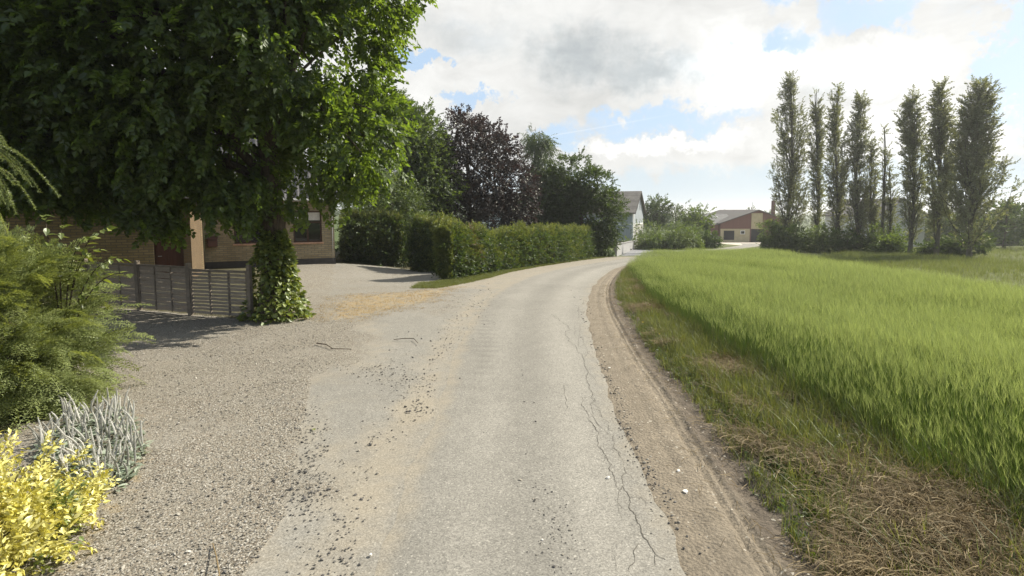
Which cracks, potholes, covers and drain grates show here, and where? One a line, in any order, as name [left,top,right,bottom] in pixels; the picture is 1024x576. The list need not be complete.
crack [558,307,665,567]
